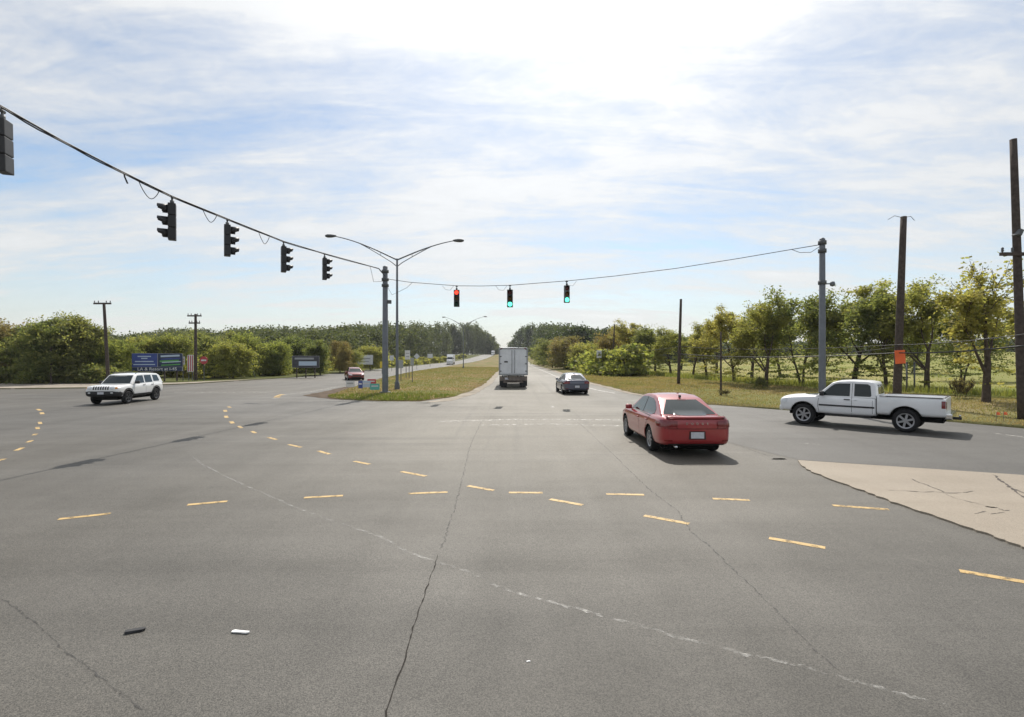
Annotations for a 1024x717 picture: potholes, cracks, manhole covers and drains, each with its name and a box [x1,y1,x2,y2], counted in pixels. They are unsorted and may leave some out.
crack [385,555,438,717]
crack [5,600,142,710]
crack [601,443,836,668]
crack [898,475,1024,514]
